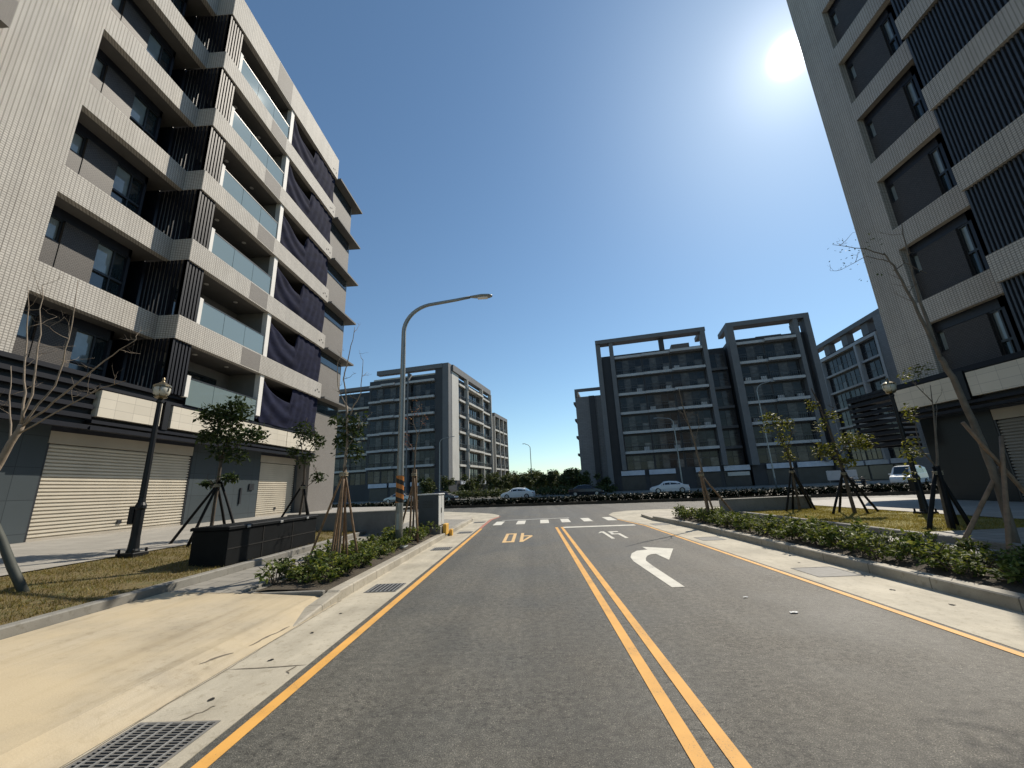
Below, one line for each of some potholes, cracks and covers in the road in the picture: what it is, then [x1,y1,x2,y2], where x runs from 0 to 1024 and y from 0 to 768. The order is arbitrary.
drain grate [66,720,221,768]
drain grate [363,583,406,593]
